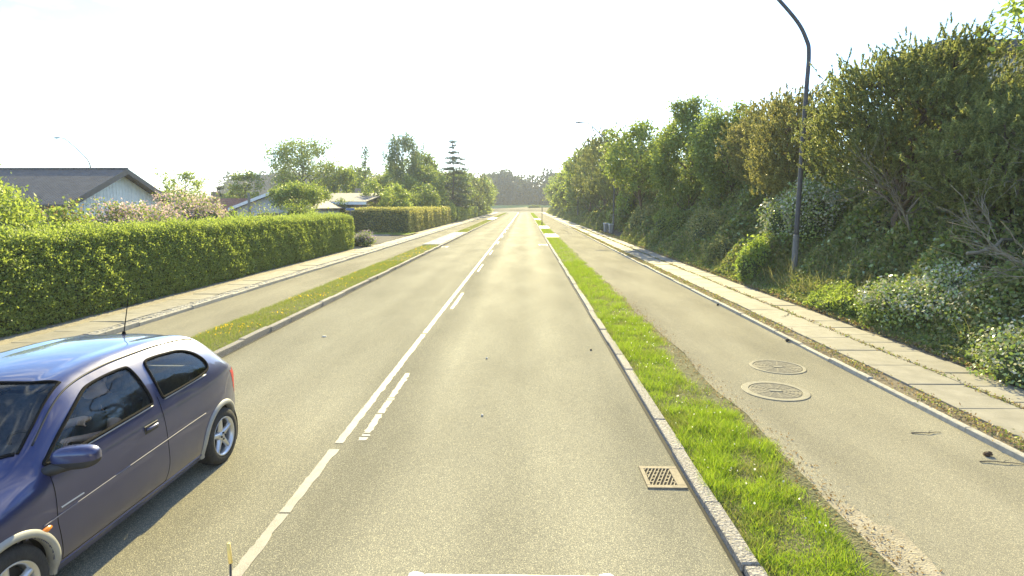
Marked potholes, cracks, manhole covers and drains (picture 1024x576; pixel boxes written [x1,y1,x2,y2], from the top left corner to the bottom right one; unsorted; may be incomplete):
manhole cover [749,360,807,375]
drain grate [638,466,688,489]
manhole cover [741,381,811,402]
